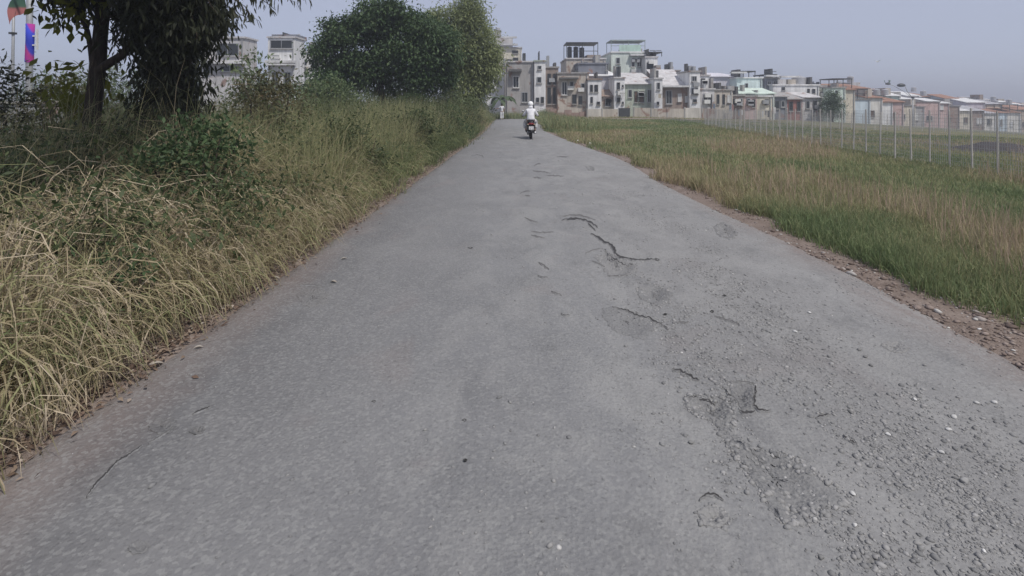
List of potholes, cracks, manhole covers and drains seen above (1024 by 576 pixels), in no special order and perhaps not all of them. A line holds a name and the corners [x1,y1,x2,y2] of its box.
pothole [729,384,755,410]
crack [672,368,771,416]
crack [525,214,660,277]
pothole [682,396,735,435]
pothole [697,505,730,527]
crack [612,306,688,328]
